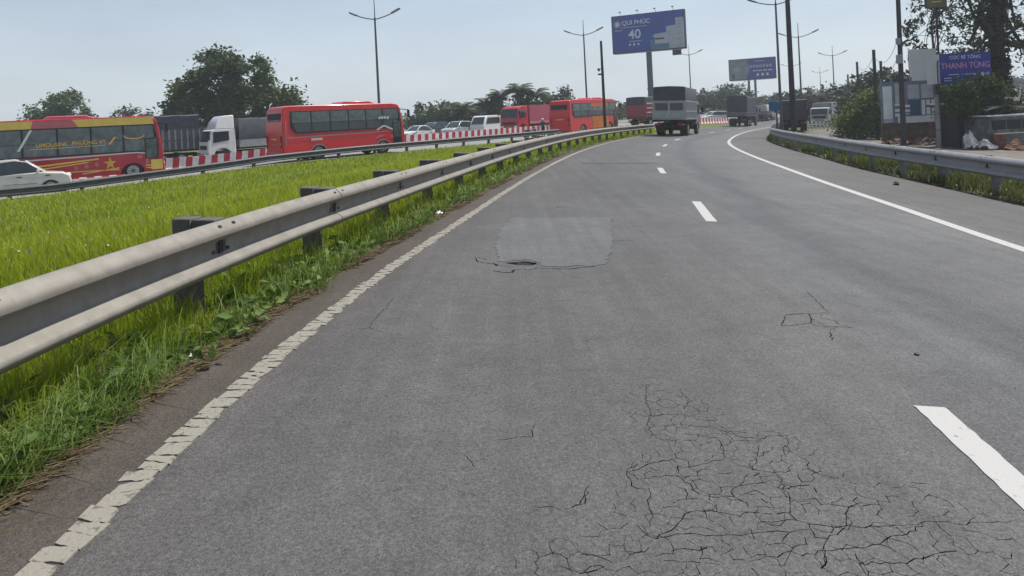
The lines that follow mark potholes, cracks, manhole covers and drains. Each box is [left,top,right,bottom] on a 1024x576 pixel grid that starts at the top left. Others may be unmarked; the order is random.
crack [781,292,851,340]
crack [513,384,1023,576]
